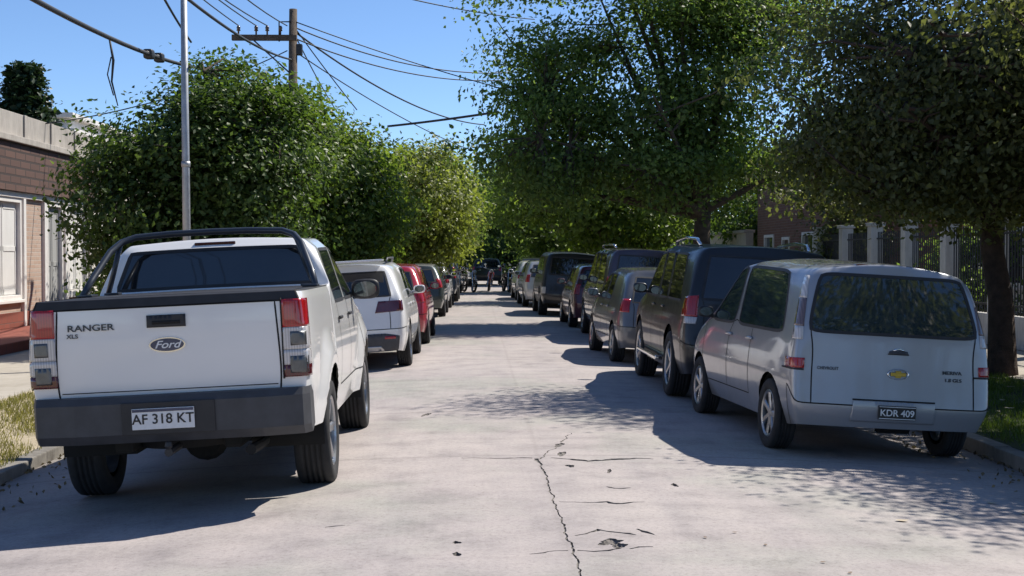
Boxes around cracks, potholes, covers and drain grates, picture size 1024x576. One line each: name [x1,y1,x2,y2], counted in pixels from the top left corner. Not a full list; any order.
crack [492,433,655,576]
pothole [597,538,628,549]
